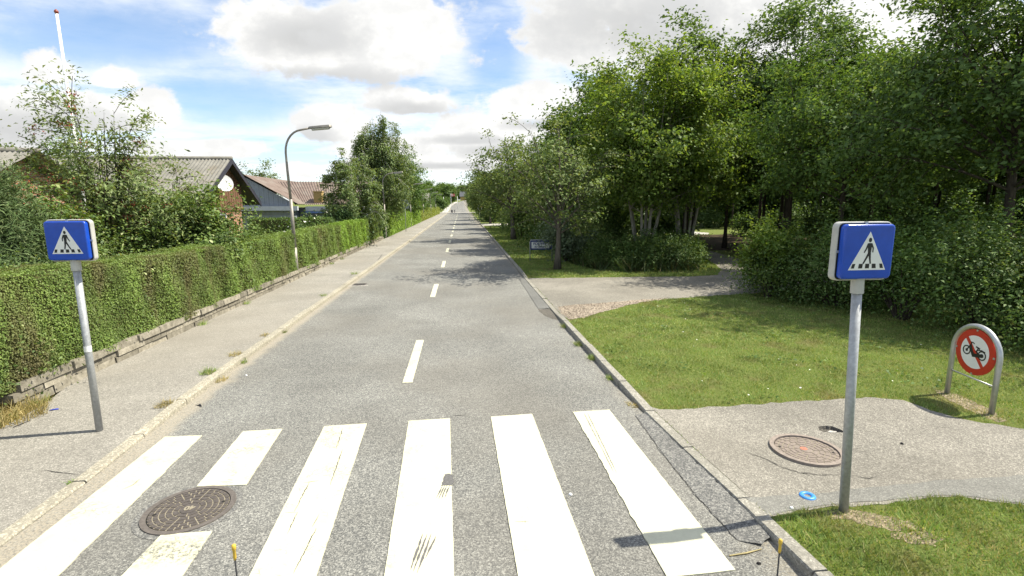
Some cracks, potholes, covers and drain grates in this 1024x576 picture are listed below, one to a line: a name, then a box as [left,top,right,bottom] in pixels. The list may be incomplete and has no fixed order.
crack [750,453,872,479]
manhole cover [769,433,842,468]
manhole cover [131,485,243,540]
